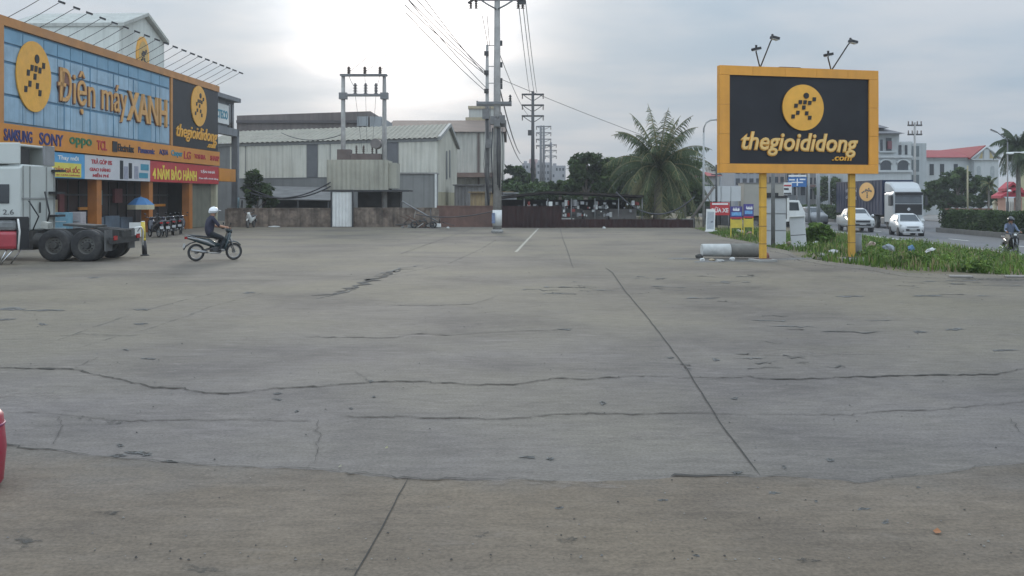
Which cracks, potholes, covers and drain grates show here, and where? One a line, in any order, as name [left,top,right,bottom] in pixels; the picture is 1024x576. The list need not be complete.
crack [0,358,645,394]
crack [759,401,1023,434]
crack [7,411,559,481]
crack [649,369,1017,379]
